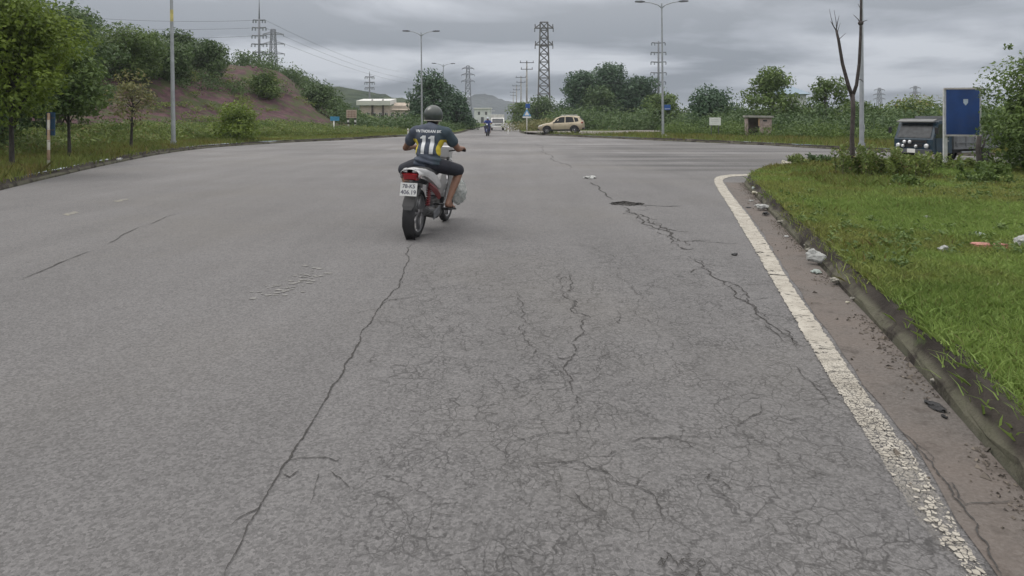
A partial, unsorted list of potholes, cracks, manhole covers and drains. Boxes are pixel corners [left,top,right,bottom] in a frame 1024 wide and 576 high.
crack [223,244,503,575]
crack [590,182,848,404]
